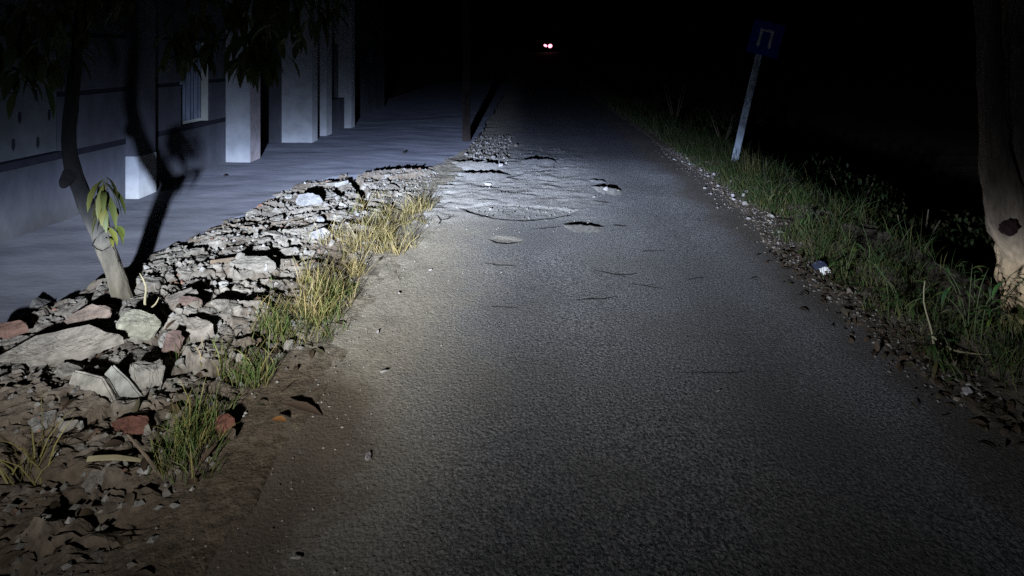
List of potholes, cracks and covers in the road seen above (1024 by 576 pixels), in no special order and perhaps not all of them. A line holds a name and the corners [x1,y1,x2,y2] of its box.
pothole [521,157,557,165]
pothole [563,221,605,233]
pothole [591,185,623,196]
pothole [458,170,512,181]
crack [578,270,664,300]
